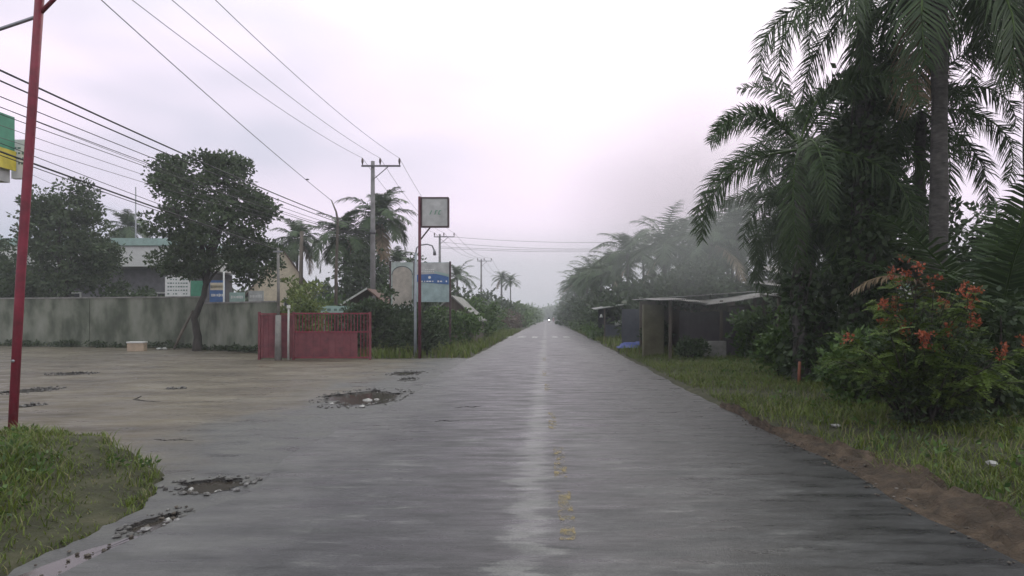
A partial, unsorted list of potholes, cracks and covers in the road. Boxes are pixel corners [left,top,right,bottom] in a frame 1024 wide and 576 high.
pothole [112,506,195,538]
pothole [0,386,66,395]
pothole [308,388,415,409]
pothole [157,475,263,496]
